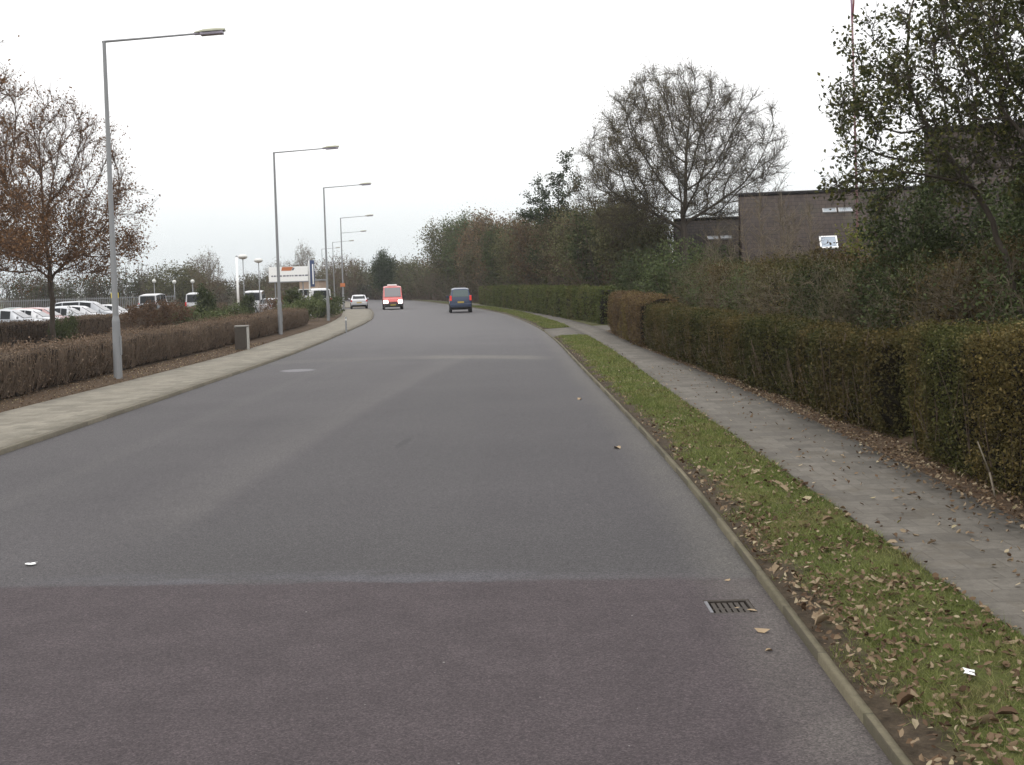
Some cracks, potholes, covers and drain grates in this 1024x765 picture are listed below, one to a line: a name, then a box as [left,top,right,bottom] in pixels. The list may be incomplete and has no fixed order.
drain grate [703,599,757,614]
